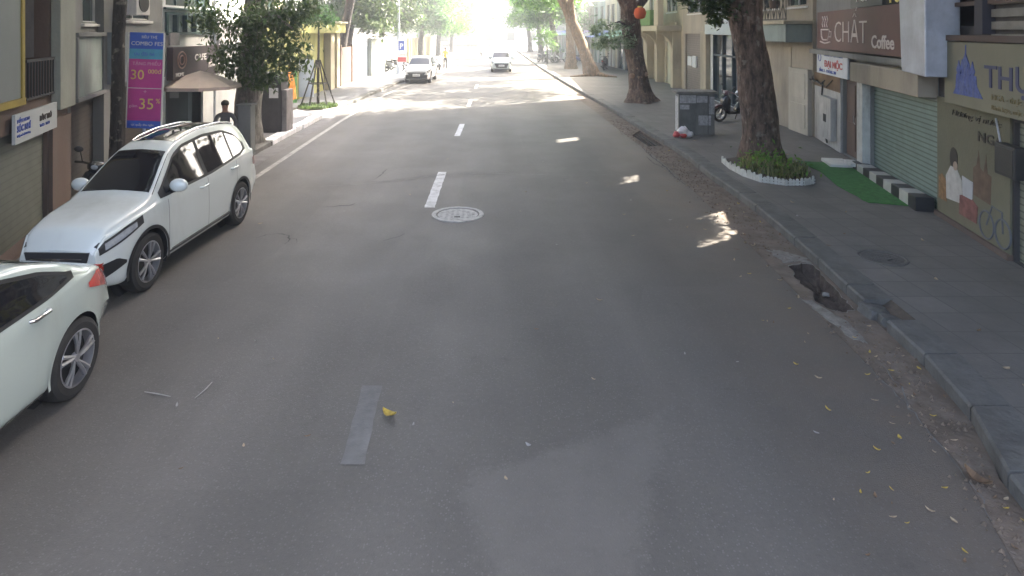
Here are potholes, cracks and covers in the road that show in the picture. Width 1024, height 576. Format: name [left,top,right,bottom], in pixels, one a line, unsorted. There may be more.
manhole cover [856,249,910,266]
manhole cover [431,206,484,222]
pothole [788,262,855,313]
